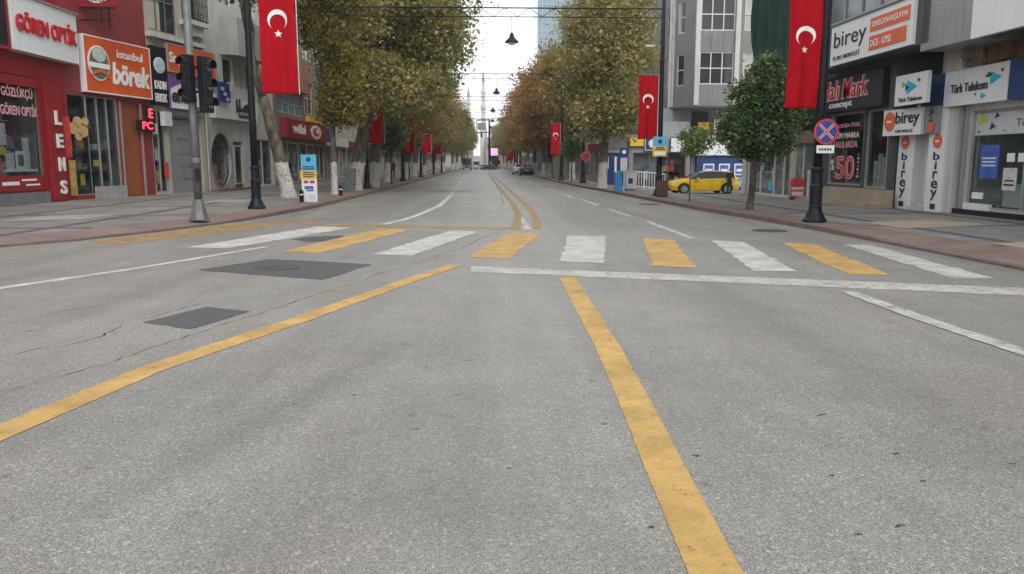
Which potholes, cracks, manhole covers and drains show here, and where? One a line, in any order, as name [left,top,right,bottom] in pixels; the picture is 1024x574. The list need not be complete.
crack [7,326,121,357]
